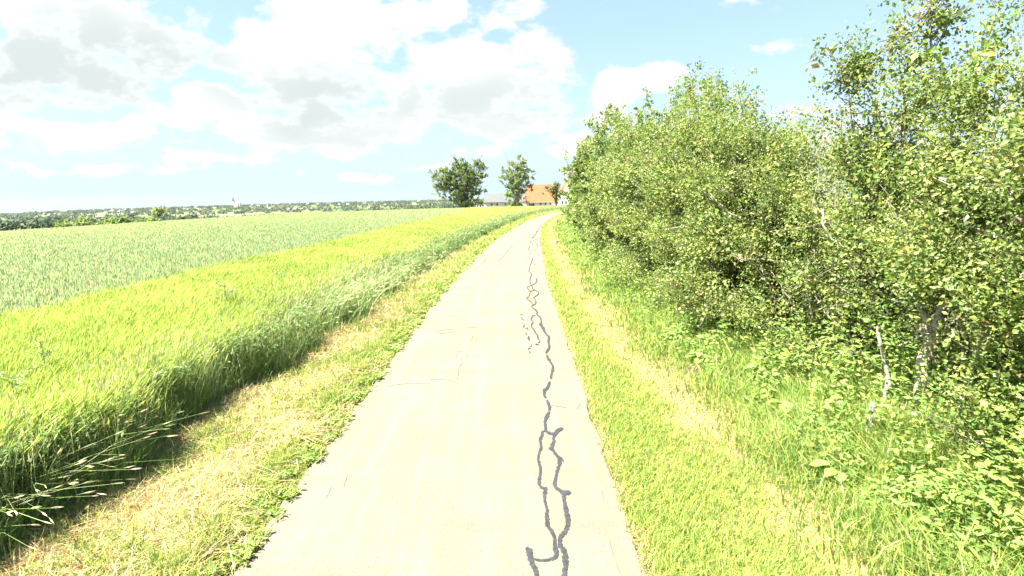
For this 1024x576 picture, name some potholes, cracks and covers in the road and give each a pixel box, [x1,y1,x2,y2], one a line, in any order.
crack [388,316,473,387]
crack [552,323,580,409]
